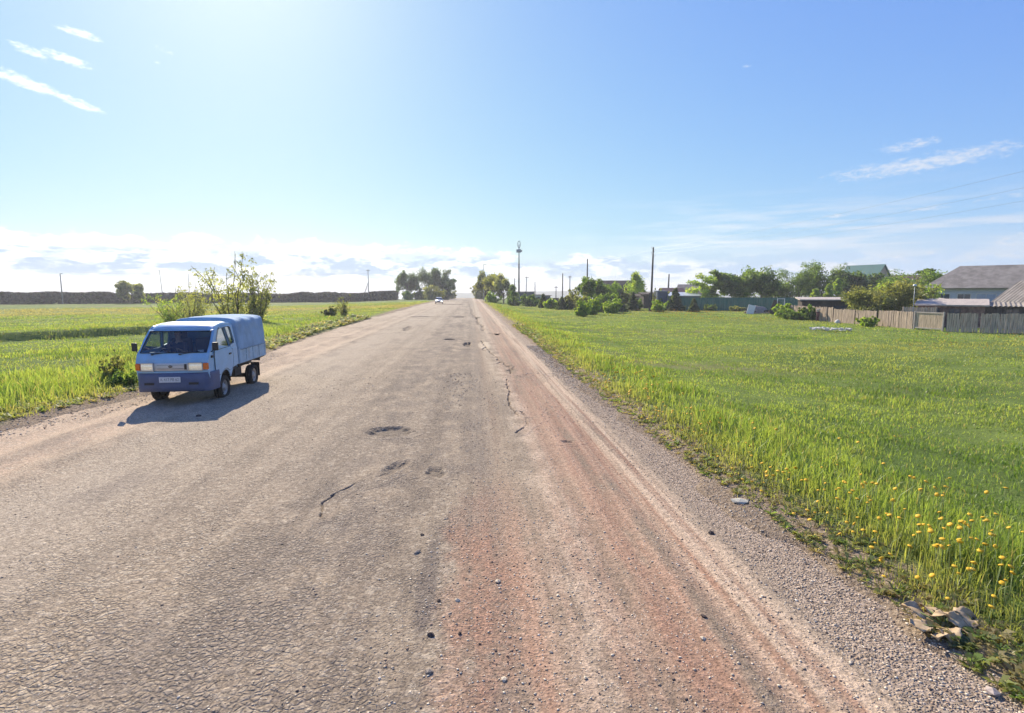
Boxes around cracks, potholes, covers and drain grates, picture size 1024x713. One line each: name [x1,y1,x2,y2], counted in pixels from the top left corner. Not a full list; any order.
pothole [353,451,432,491]
crack [306,480,364,524]
pothole [351,424,428,440]
crack [404,303,546,436]
pothole [411,462,459,484]
